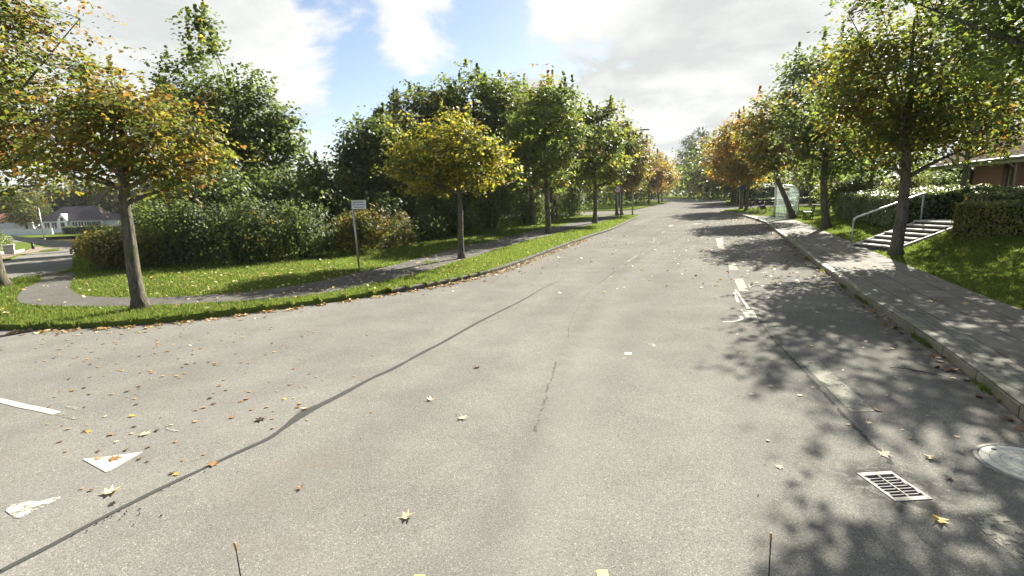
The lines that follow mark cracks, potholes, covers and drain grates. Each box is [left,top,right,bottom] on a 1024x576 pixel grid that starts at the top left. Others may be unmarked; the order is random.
manhole cover [972,443,1024,482]
crack [533,362,557,432]
drain grate [857,471,933,502]
